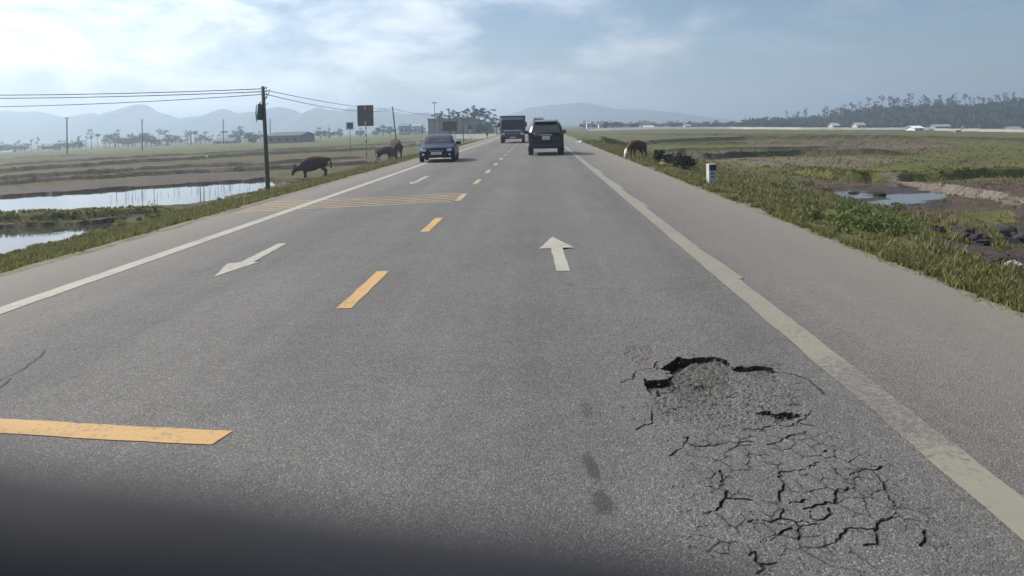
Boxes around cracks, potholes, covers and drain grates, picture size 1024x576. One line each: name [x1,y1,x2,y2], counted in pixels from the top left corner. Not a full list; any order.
pothole [643,357,730,398]
pothole [756,411,801,422]
crack [634,372,953,576]
crack [0,348,77,387]
pothole [731,365,776,377]
